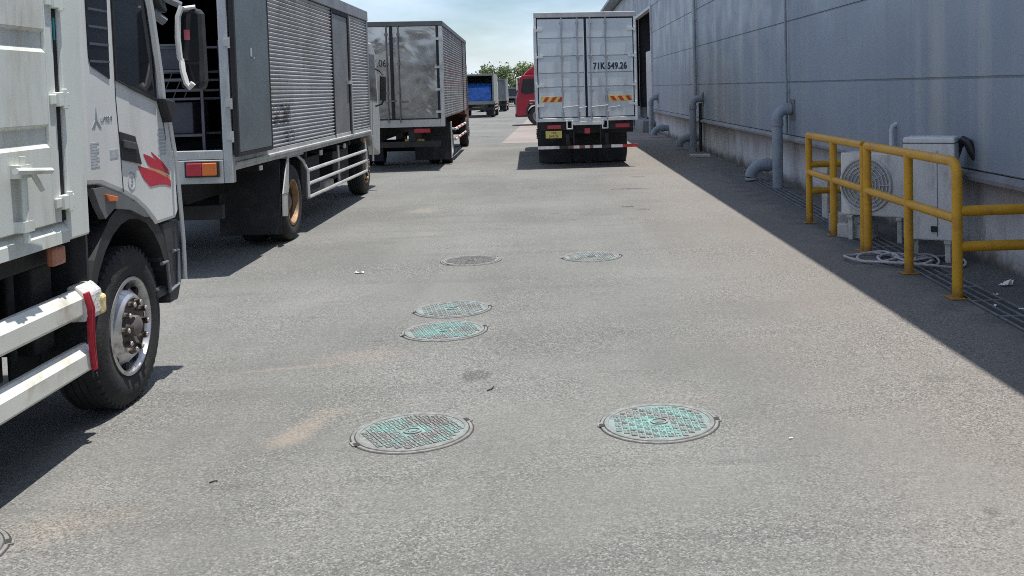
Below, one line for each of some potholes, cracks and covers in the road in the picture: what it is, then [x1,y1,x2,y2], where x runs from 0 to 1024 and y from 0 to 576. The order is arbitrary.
manhole cover [411,301,493,319]
manhole cover [0,529,15,557]
manhole cover [560,251,623,262]
manhole cover [440,255,502,266]
manhole cover [349,412,474,455]
manhole cover [597,403,722,444]
manhole cover [399,321,489,342]
